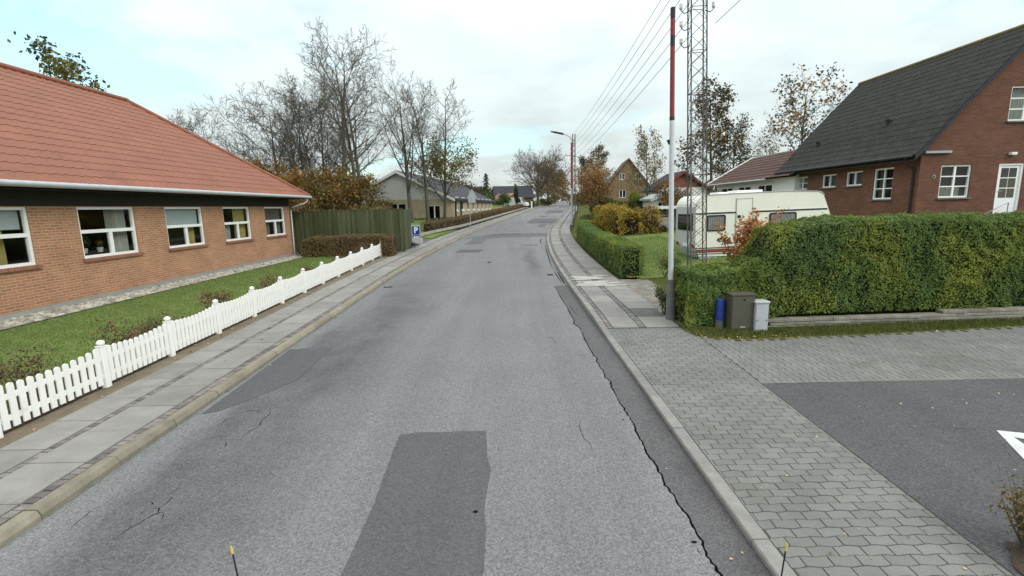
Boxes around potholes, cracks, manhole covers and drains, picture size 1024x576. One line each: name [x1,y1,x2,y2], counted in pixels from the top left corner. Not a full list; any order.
crack [118,487,179,537]
crack [540,240,723,576]
